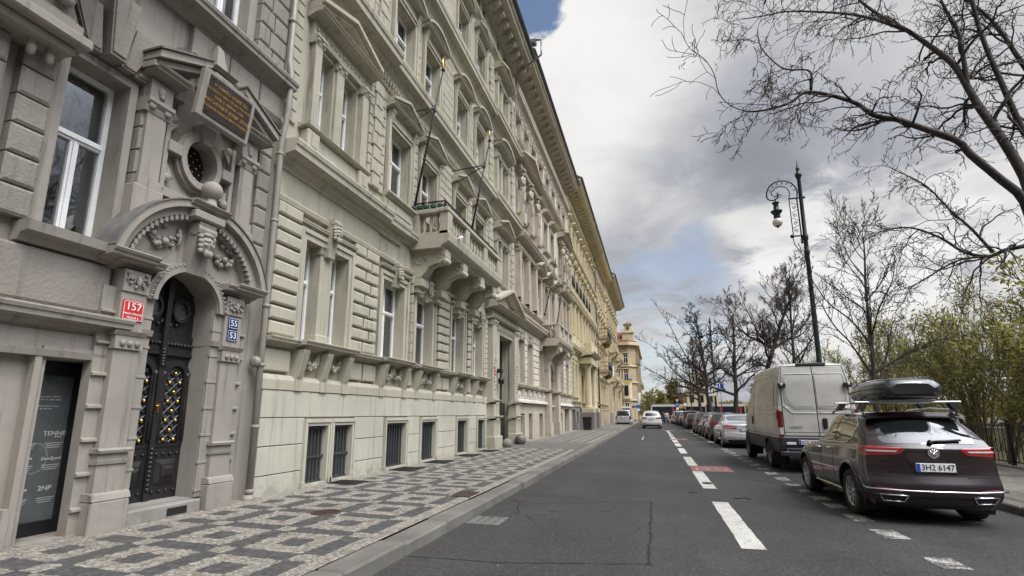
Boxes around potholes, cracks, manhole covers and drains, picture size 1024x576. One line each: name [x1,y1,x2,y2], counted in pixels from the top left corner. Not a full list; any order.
crack [412,499,653,565]
